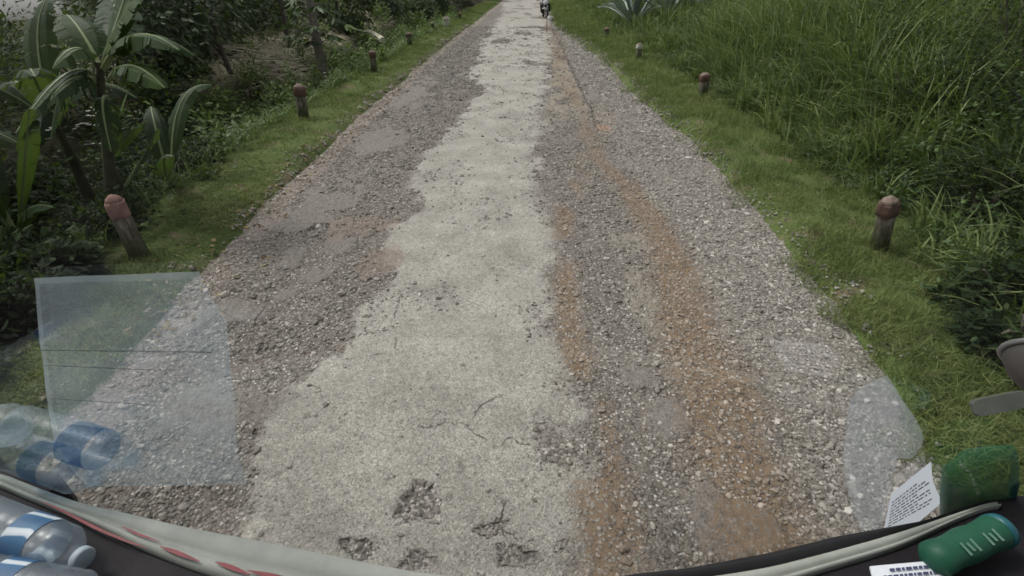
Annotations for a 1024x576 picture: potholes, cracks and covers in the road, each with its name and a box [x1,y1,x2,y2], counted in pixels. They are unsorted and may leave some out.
pothole [336,537,377,561]
crack [418,395,527,445]
pothole [392,478,442,525]
pothole [471,520,505,538]
pothole [495,541,543,568]
